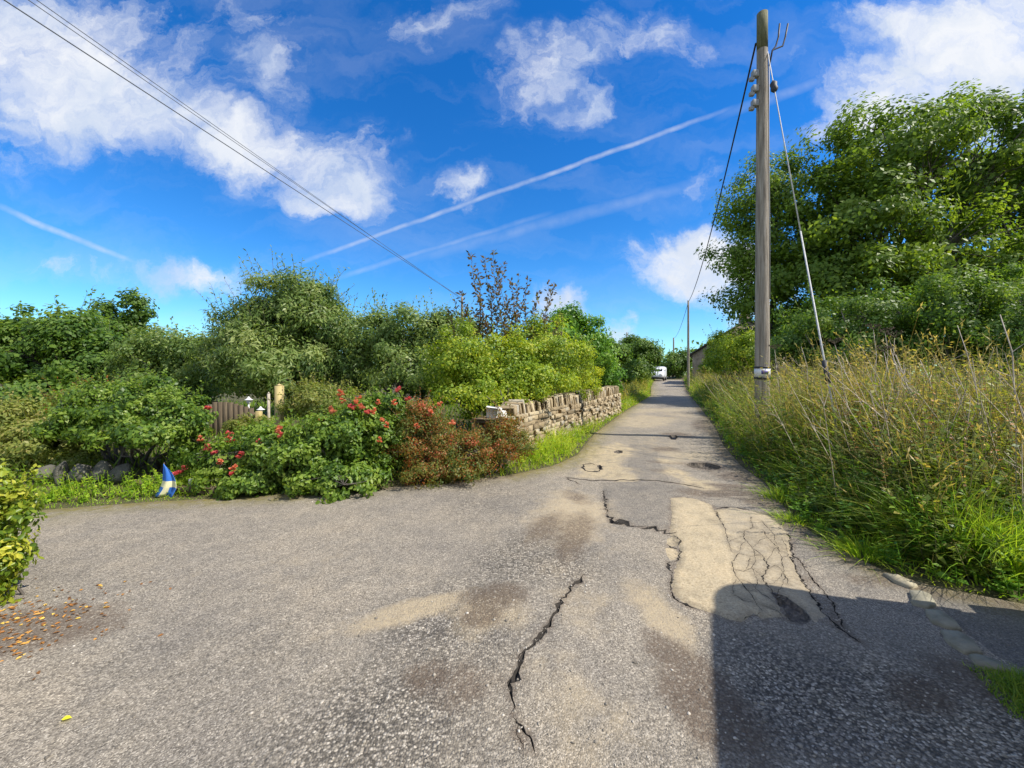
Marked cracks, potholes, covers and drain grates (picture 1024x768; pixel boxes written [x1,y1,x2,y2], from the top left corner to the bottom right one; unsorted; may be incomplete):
crack [507,576,583,753]
pothole [771,593,811,625]
crack [712,507,863,644]
crack [567,463,710,611]
